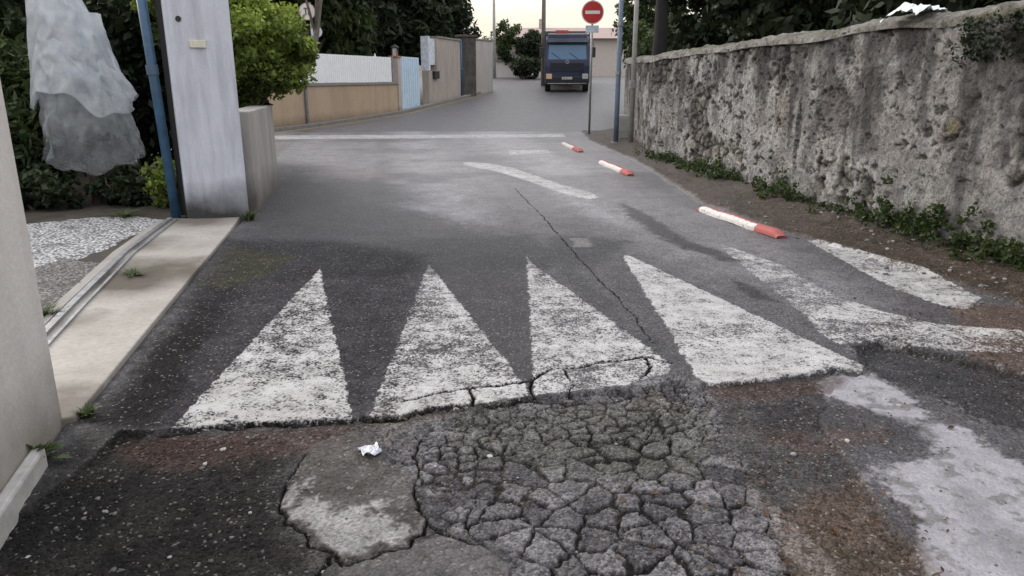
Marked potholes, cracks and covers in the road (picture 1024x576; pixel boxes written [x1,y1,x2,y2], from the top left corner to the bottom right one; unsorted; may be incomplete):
crack [158,188,795,576]
